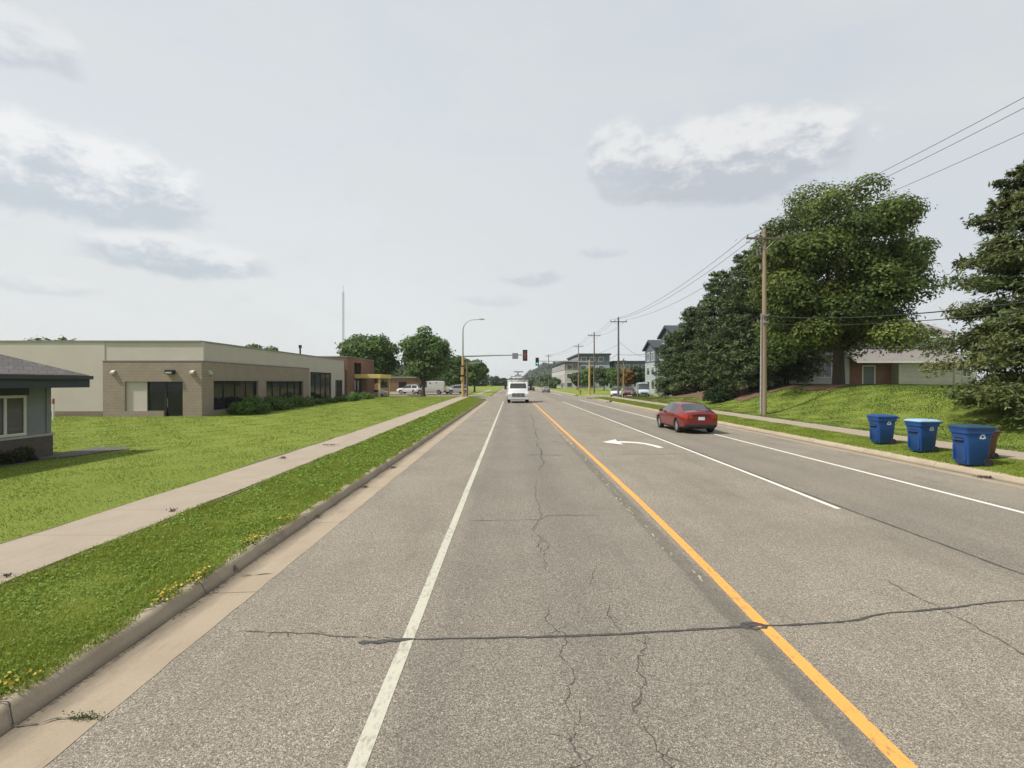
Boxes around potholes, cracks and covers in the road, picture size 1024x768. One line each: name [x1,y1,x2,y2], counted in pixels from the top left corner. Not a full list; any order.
crack [529,411,556,467]
crack [532,481,593,768]
